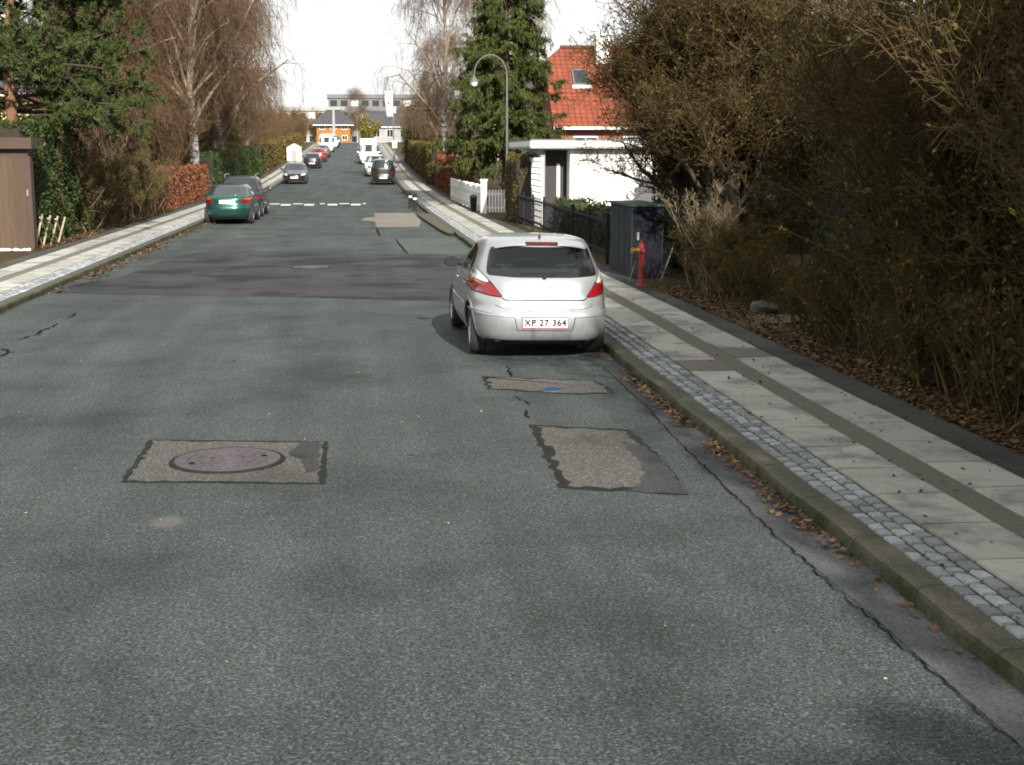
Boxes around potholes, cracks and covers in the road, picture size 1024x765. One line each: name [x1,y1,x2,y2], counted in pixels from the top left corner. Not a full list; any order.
crack [1,312,77,356]
manhole cover [168,447,286,474]
